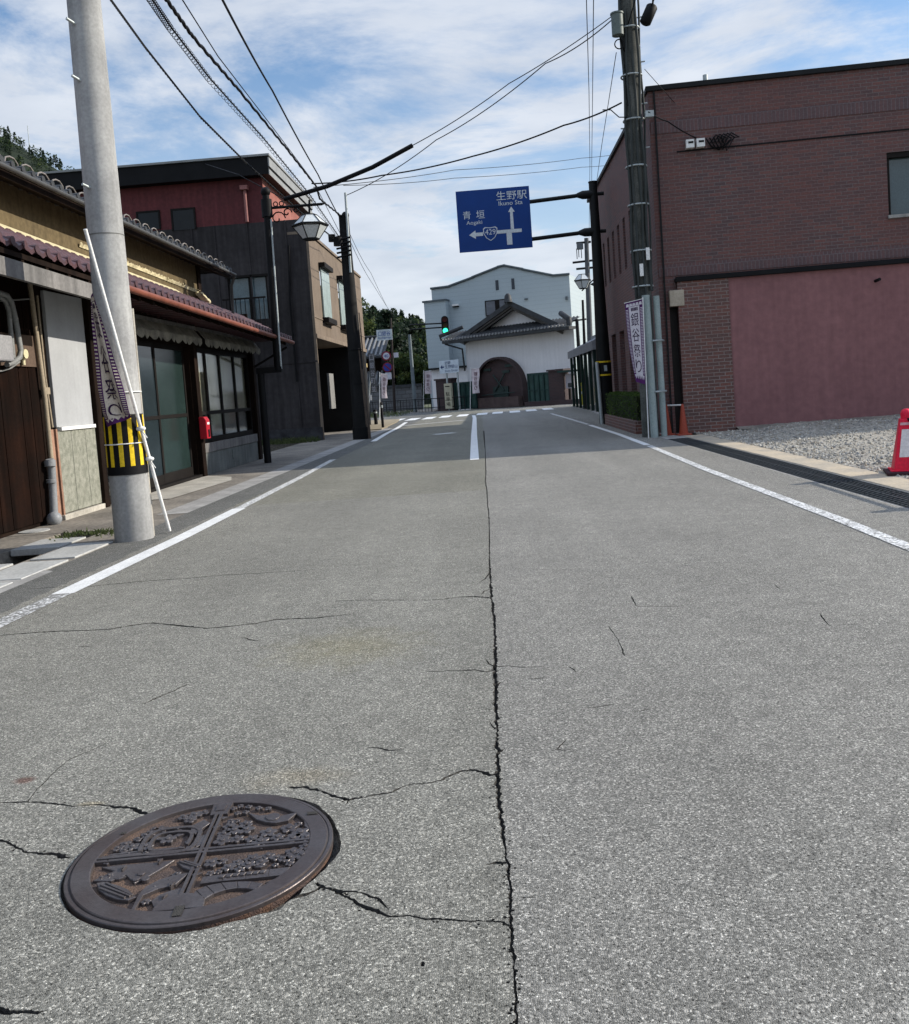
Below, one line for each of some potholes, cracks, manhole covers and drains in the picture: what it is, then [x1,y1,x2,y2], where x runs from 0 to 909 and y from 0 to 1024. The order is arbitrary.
crack [0,431,544,1024]
drain grate [762,464,822,474]
drain grate [741,458,791,466]
manhole cover [63,794,333,934]
drain grate [790,471,857,483]
drain grate [821,480,901,494]
drain grate [859,491,909,509]
